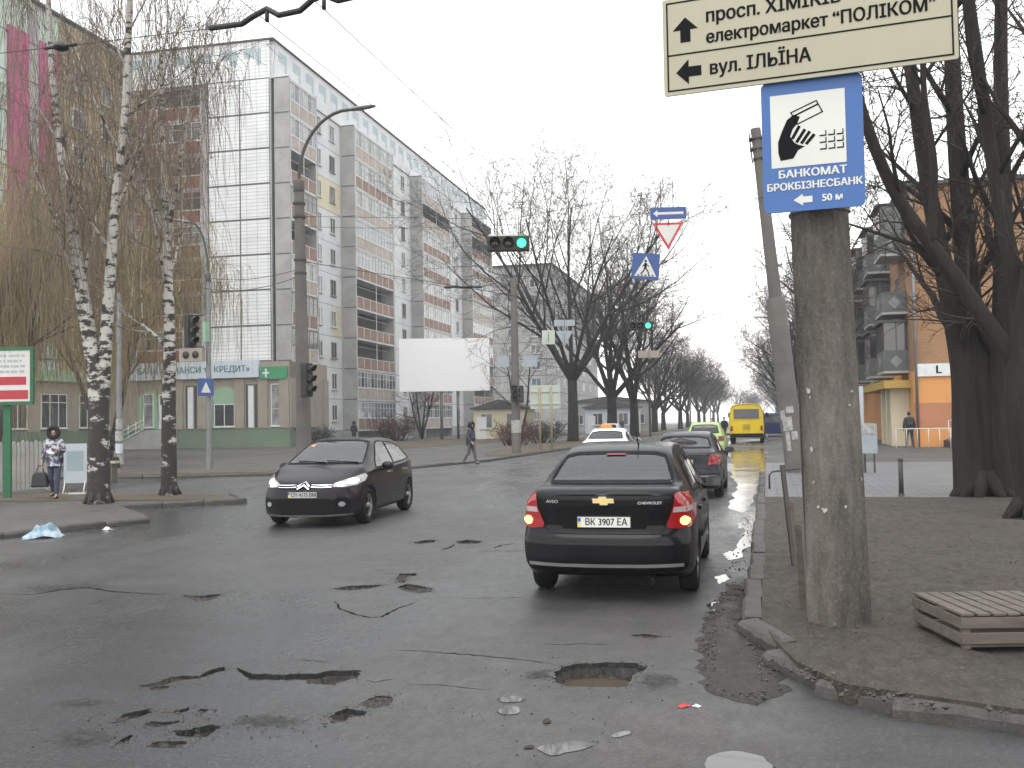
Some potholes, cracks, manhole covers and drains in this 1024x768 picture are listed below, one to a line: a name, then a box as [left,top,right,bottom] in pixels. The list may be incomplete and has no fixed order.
pothole [137,737,198,753]
pothole [99,705,159,726]
pothole [164,723,235,741]
pothole [544,659,655,689]
pothole [395,584,434,594]
pothole [391,573,420,583]
crack [335,601,419,618]
crack [23,587,172,595]
pothole [321,706,371,724]
crack [399,643,604,665]
pothole [229,667,369,686]
pothole [182,593,224,603]
